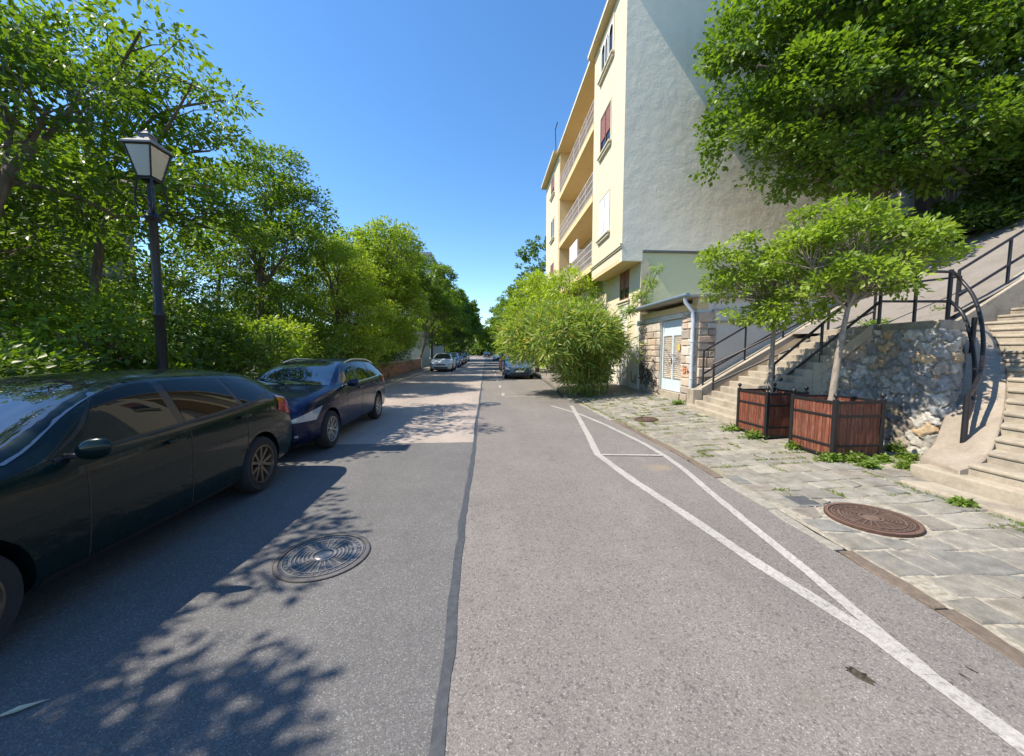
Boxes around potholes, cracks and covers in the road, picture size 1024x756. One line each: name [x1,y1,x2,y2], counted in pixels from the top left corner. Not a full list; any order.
pothole [845,666,876,686]
manhole cover [272,533,370,583]
manhole cover [823,503,926,538]
